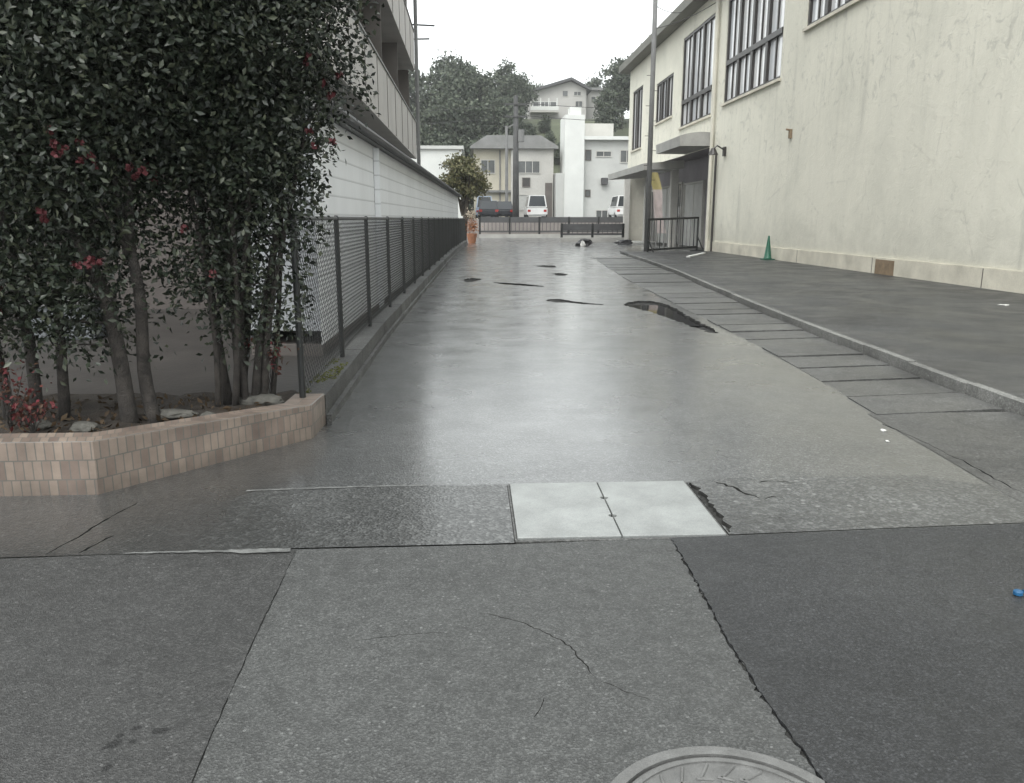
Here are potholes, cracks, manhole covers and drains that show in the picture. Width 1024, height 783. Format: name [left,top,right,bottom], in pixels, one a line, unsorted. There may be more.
pothole [624,301,718,333]
manhole cover [611,746,825,783]
crack [359,609,655,717]
crack [883,424,1021,492]
crack [675,481,818,777]
crack [45,502,138,557]
